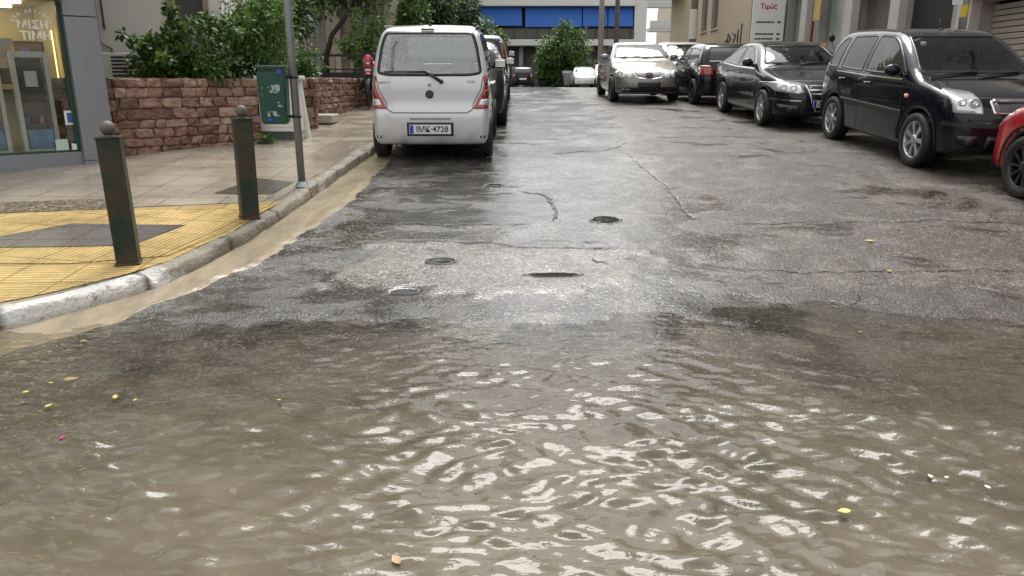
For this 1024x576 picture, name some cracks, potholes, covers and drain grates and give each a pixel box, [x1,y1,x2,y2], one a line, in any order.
crack [413,174,558,220]
crack [737,268,1024,310]
manhole cover [425,257,457,265]
